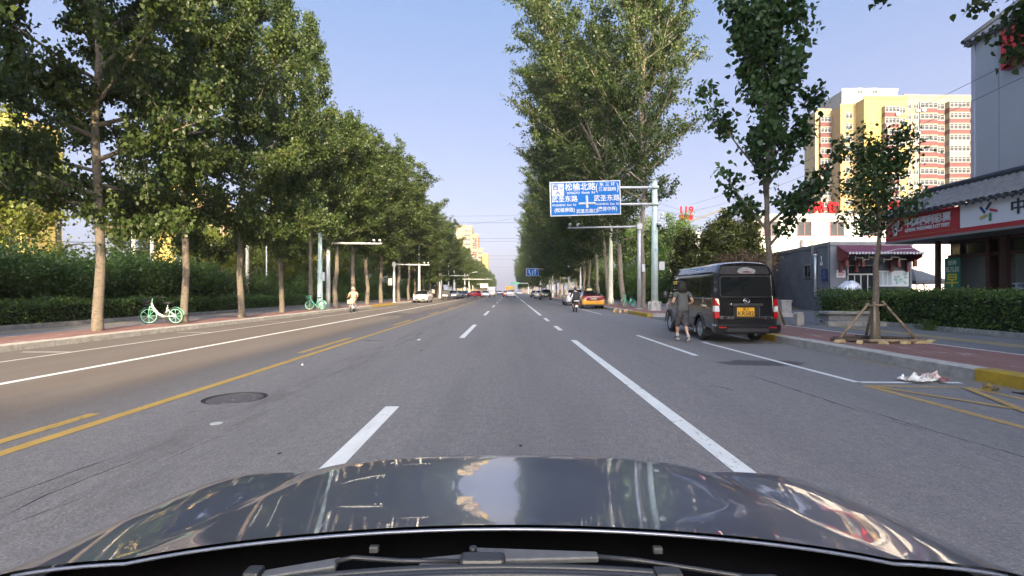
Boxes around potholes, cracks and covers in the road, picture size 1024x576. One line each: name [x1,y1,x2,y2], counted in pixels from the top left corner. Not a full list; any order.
manhole cover [201,392,268,405]
crack [0,435,223,522]
